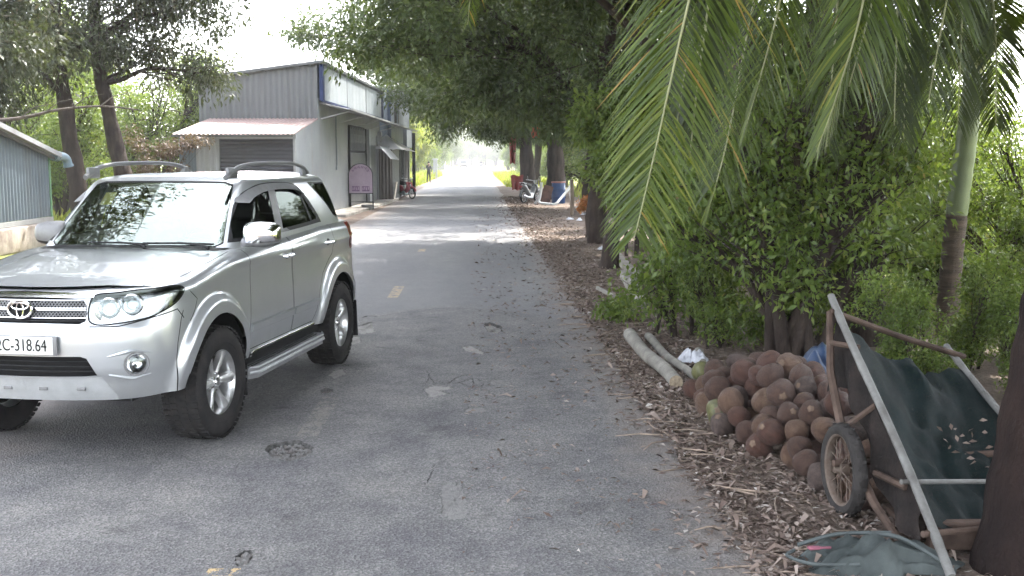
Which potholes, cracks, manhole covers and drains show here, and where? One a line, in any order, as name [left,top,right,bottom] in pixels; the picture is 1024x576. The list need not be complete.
pothole [484,322,503,333]
pothole [265,440,314,461]
pothole [235,550,253,567]
crack [406,361,484,390]
